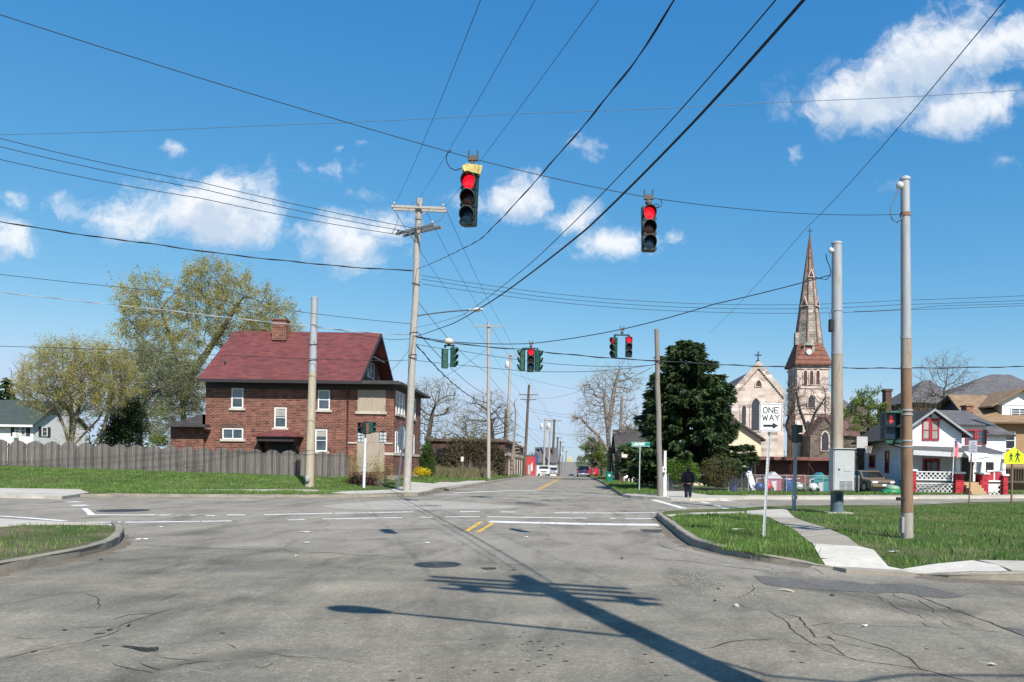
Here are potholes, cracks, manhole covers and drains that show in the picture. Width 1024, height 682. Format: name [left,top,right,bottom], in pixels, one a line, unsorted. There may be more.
crack [0,593,179,660]
crack [704,588,1020,682]
